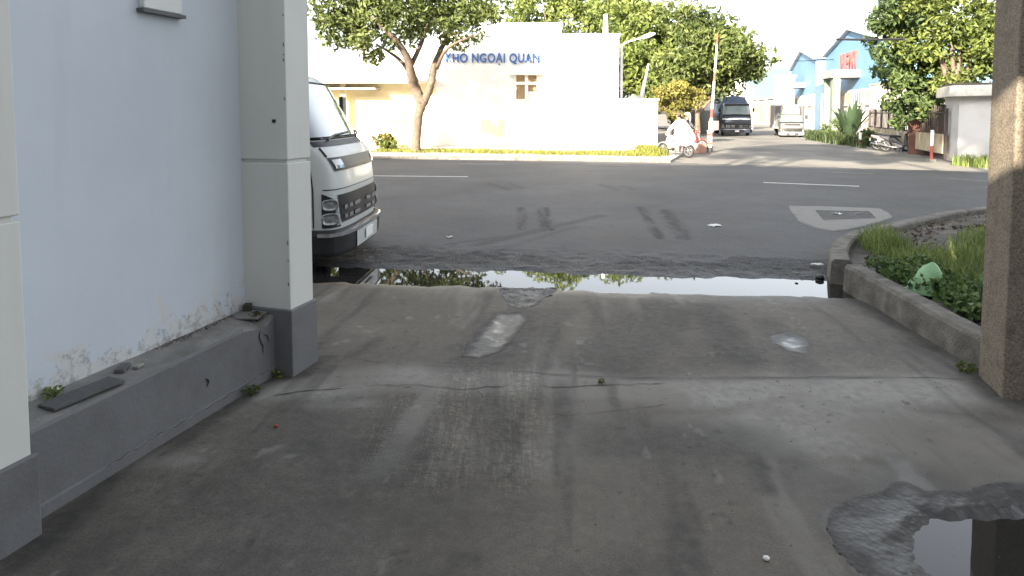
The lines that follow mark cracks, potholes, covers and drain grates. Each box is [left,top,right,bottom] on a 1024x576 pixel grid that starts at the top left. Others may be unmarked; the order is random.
pothole [498,287,558,308]
pothole [826,482,1024,576]
